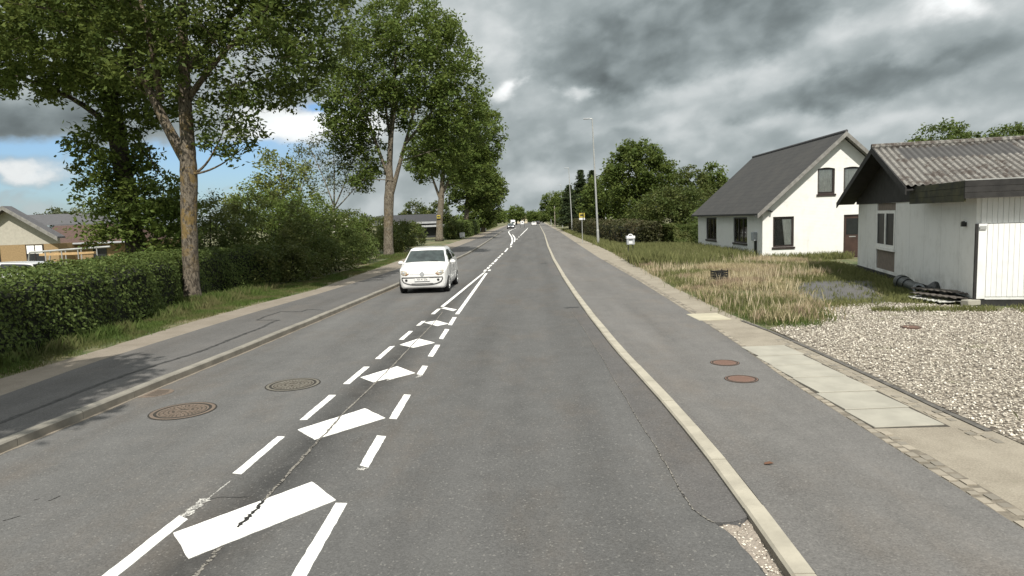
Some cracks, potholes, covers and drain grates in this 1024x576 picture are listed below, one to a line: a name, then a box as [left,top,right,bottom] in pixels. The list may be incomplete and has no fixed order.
manhole cover [265,378,321,391]
crack [574,315,713,522]
manhole cover [147,402,217,420]
pothole [715,517,784,576]
manhole cover [724,375,759,383]
